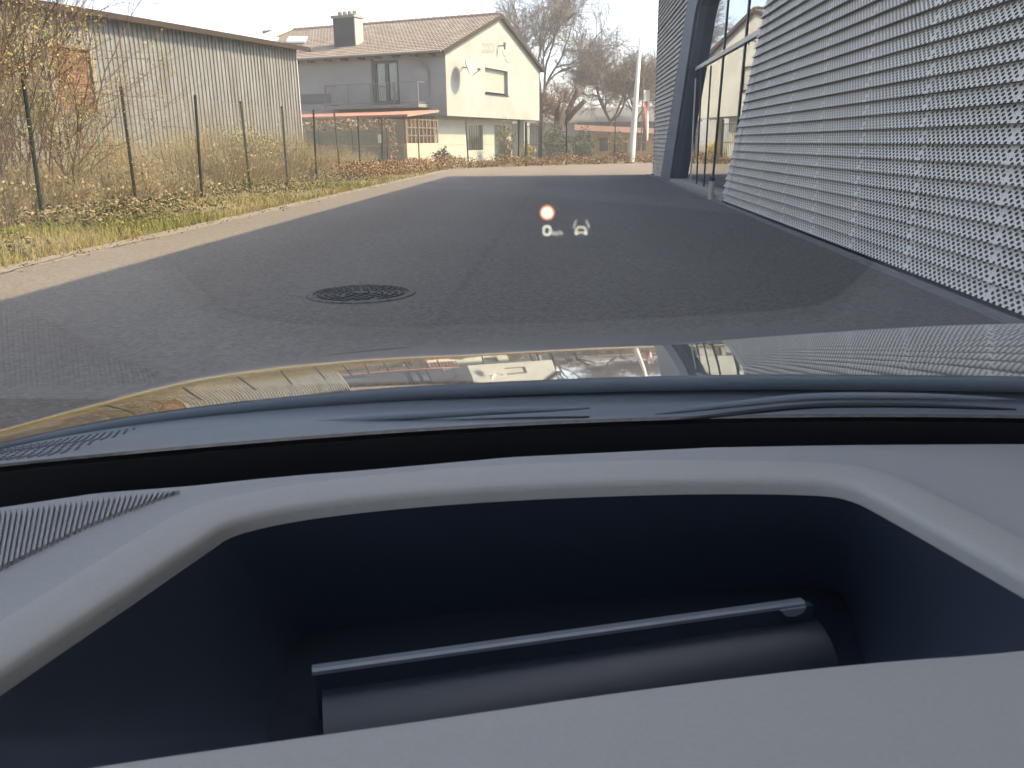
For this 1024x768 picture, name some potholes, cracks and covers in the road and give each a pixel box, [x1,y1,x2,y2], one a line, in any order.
manhole cover [306,284,416,304]
